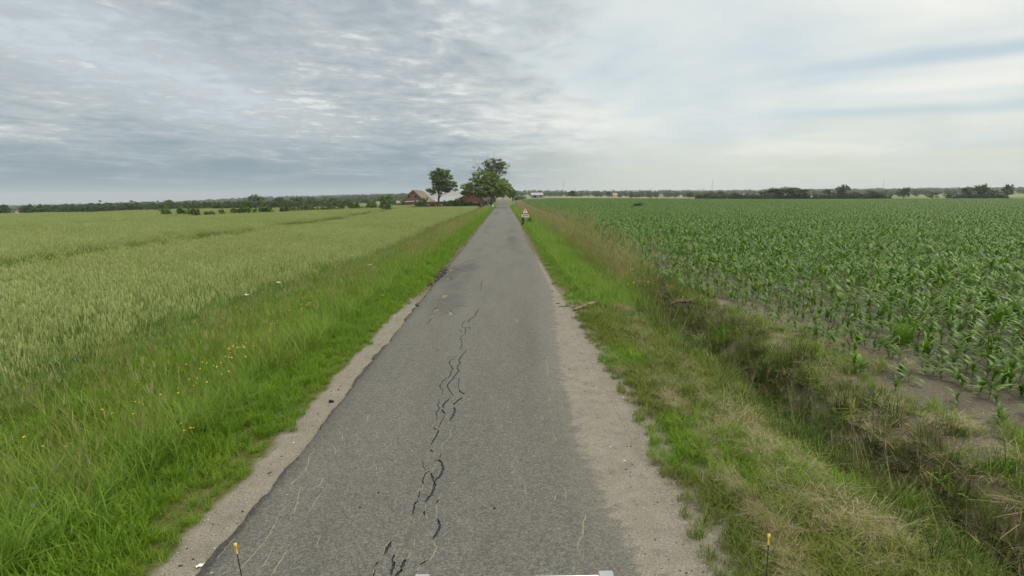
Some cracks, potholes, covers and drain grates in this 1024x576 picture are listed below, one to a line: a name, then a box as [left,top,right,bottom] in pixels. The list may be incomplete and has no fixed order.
crack [373,309,479,576]
